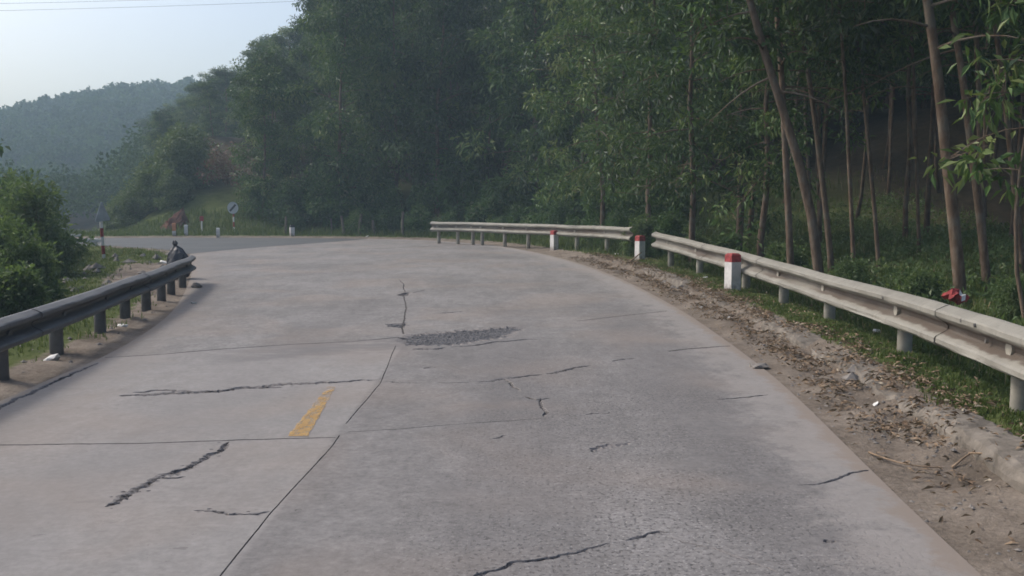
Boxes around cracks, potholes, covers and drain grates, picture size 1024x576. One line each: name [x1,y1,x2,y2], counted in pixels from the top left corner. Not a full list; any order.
pothole [395,326,537,350]
crack [804,470,868,485]
crack [104,440,270,515]
crack [391,358,635,417]
crack [118,379,372,397]
crack [473,531,780,576]
